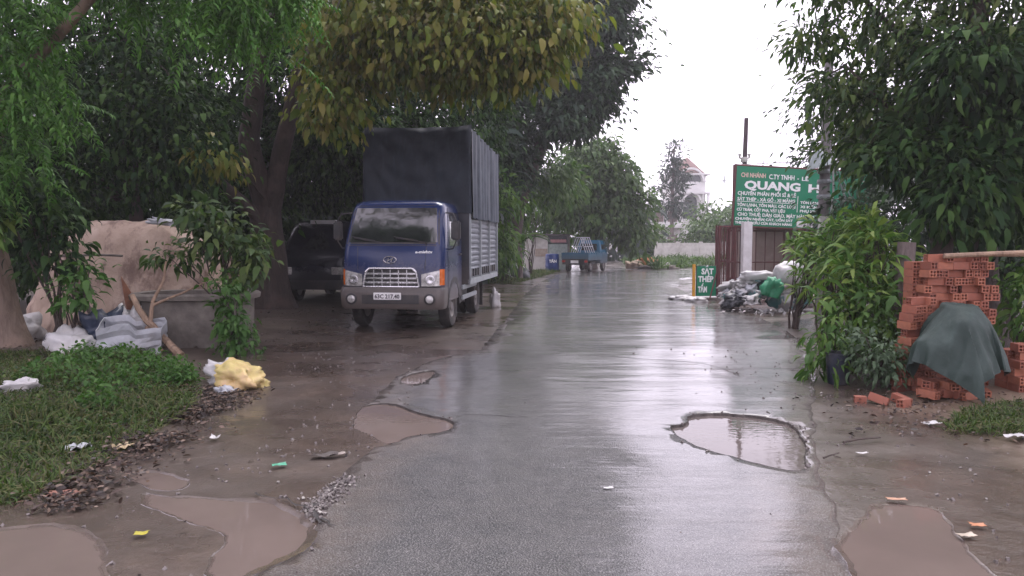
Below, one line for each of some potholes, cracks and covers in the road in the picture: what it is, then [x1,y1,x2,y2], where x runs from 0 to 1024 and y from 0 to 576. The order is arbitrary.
pothole [353,403,454,444]
pothole [141,492,318,576]
pothole [401,370,435,385]
pothole [671,413,807,471]
